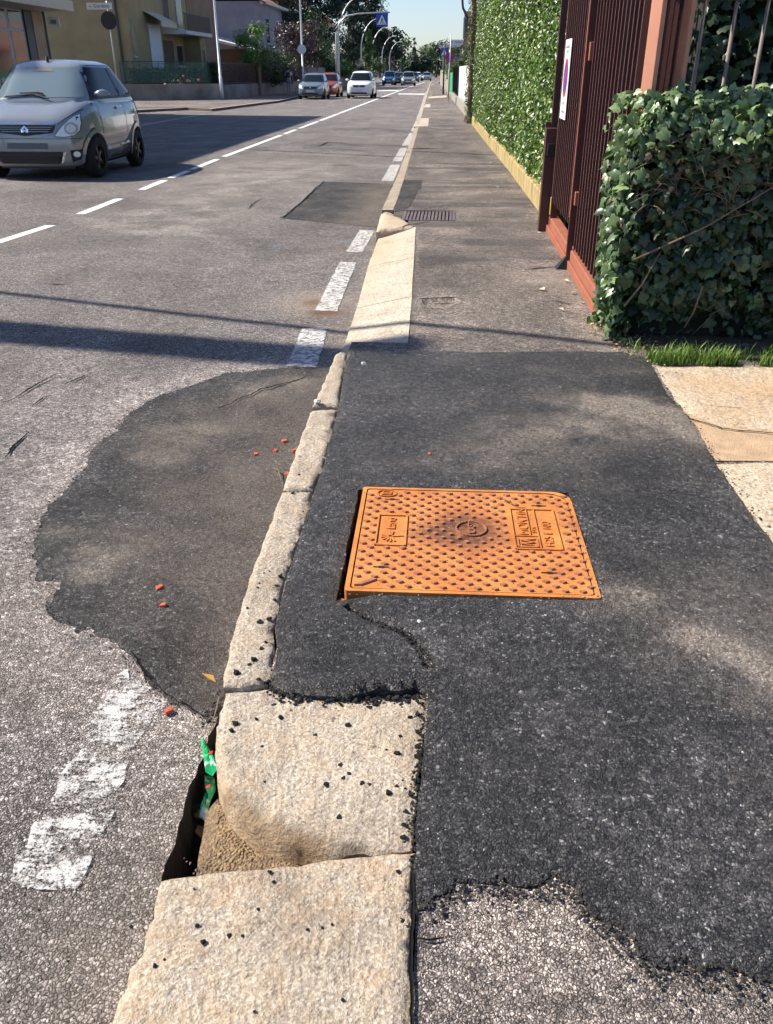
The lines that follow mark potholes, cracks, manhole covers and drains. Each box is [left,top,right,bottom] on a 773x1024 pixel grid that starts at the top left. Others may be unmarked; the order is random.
pothole [153,715,219,920]
crack [219,372,310,408]
drain grate [402,211,455,223]
crack [354,611,427,665]
manhole cover [336,487,601,601]
crack [1,373,90,405]
crack [3,432,29,459]
